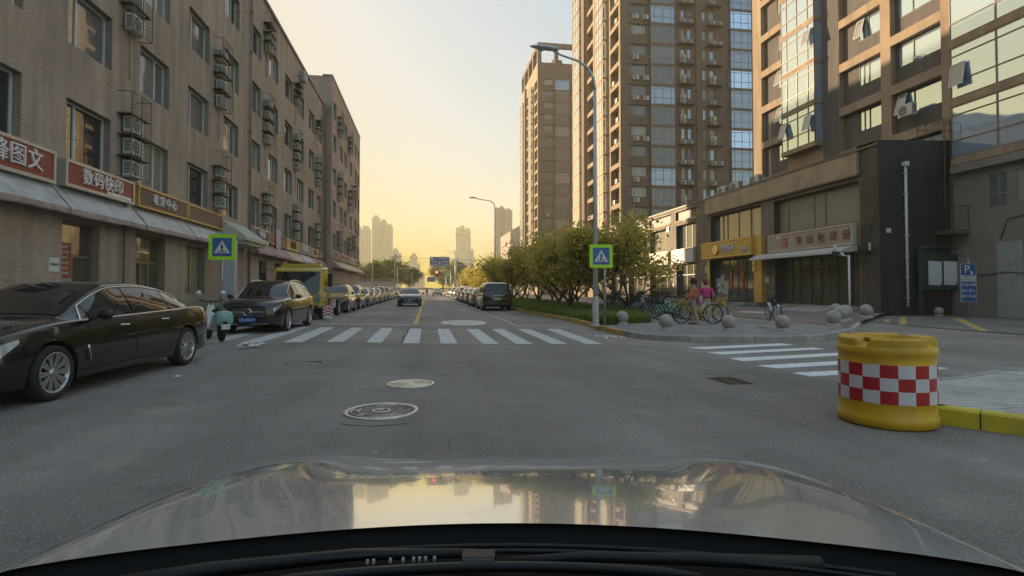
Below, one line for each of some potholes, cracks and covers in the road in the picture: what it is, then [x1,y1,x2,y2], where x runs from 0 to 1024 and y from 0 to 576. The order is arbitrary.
manhole cover [387,379,434,388]
drain grate [708,377,753,385]
manhole cover [343,402,419,420]
